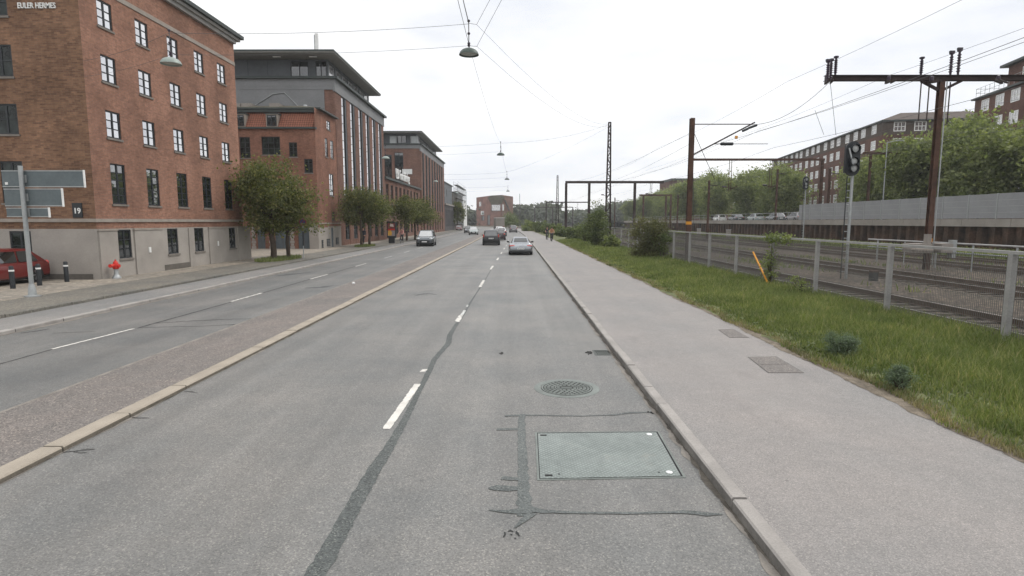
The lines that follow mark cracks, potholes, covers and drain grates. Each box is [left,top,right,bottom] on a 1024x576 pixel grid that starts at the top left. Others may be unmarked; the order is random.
utility cover [748,356,804,373]
manhole cover [534,379,599,398]
utility cover [719,329,749,338]
utility cover [535,431,686,481]
